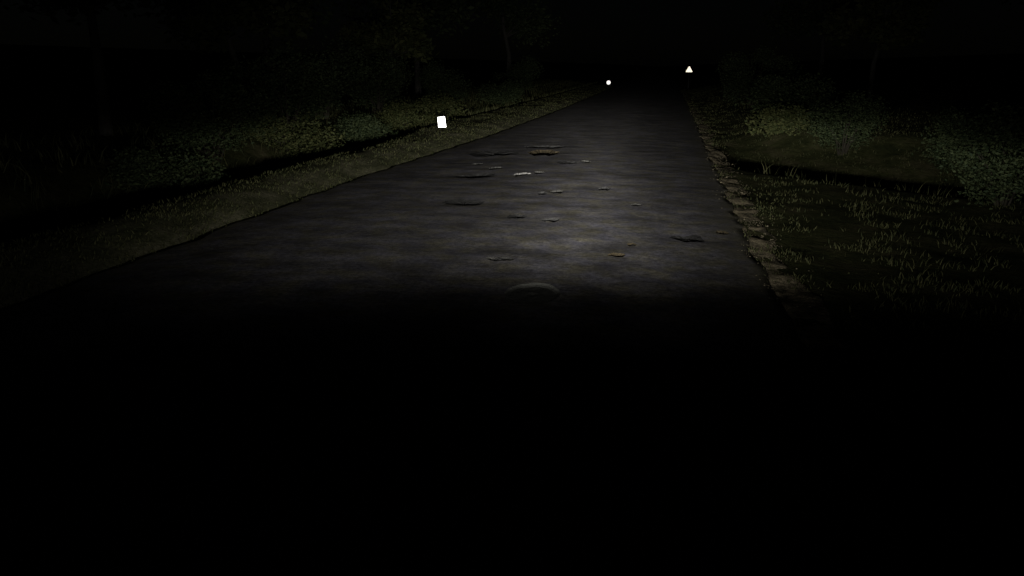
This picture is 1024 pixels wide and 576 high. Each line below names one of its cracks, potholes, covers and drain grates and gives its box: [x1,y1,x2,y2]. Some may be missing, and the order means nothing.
pothole [504,283,561,305]
